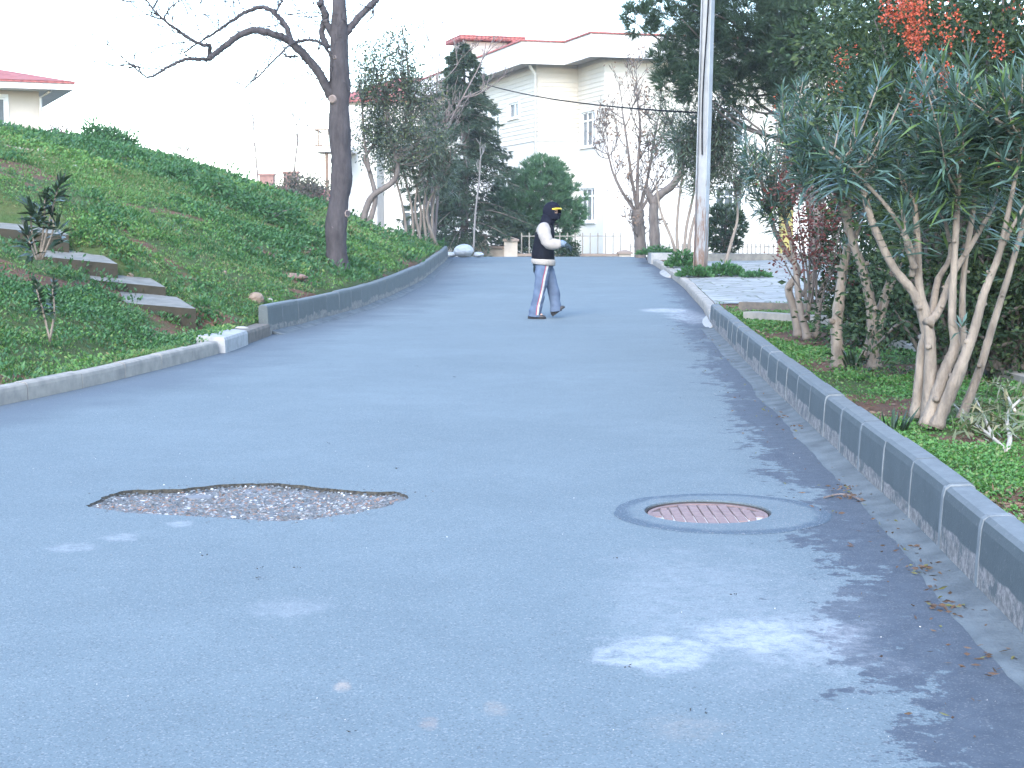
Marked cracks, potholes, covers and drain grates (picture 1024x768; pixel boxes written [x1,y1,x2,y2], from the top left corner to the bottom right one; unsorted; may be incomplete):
manhole cover [614,494,833,534]
pothole [86,478,433,526]
